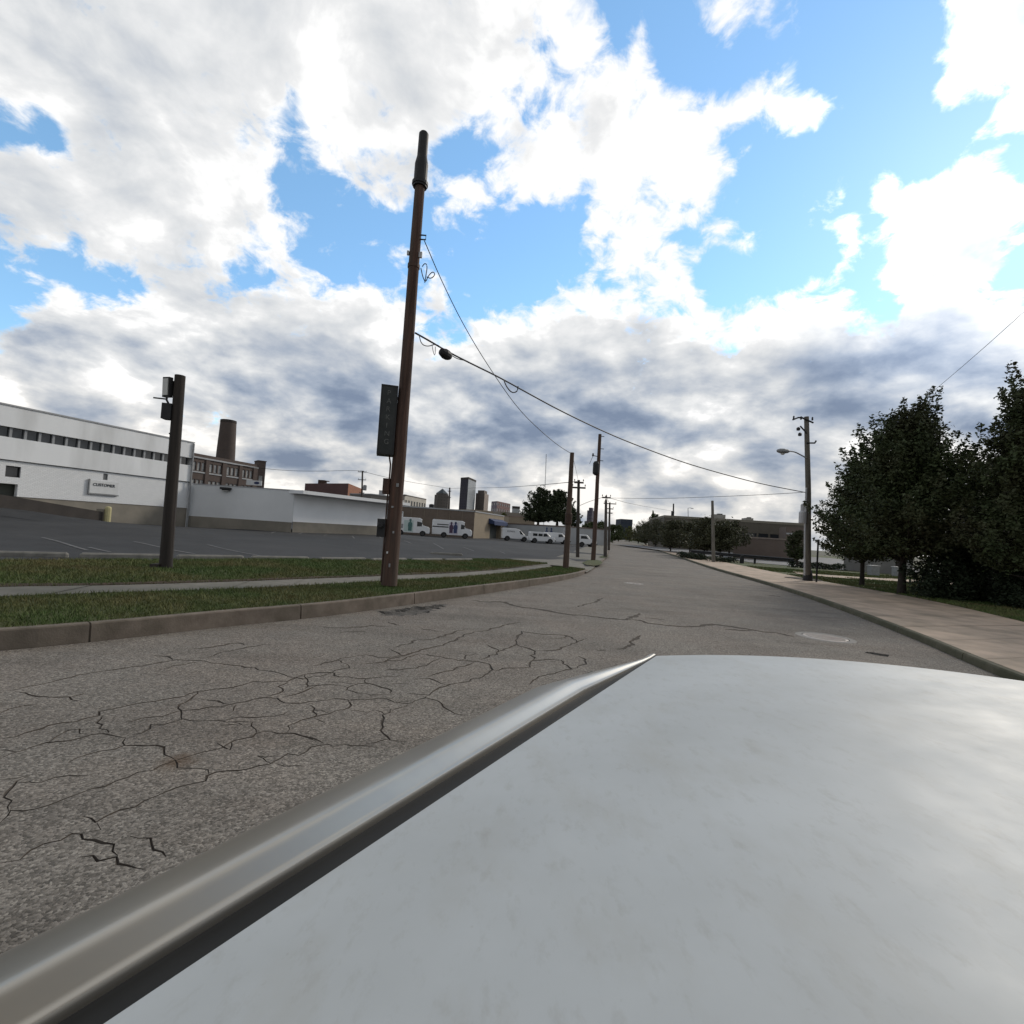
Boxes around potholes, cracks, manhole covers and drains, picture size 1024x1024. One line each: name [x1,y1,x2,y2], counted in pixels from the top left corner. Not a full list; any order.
crack [475,598,795,651]
crack [0,622,587,870]
manhole cover [795,632,857,644]
